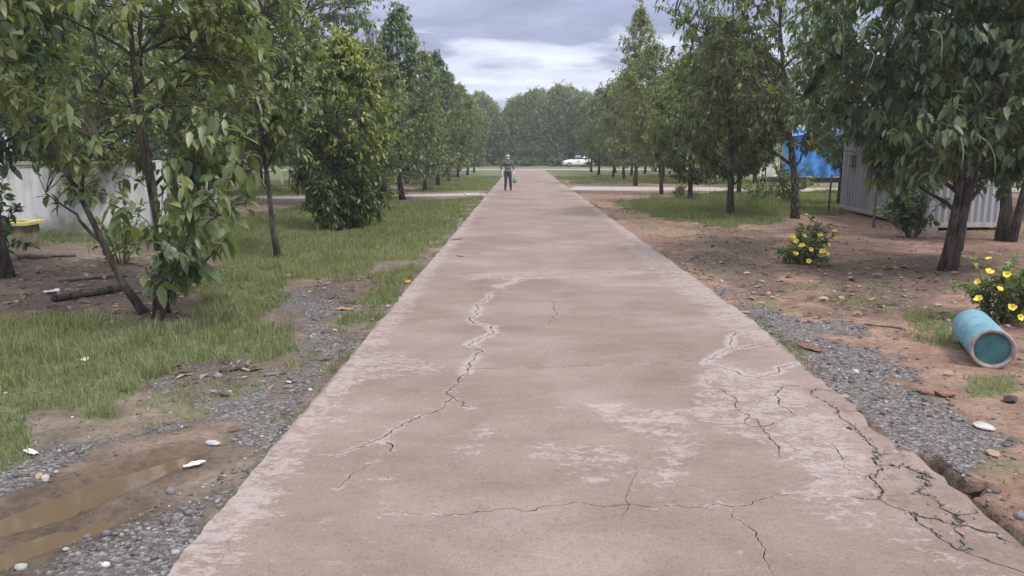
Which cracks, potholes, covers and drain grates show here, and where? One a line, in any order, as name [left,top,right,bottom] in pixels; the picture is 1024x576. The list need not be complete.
crack [810,389,1024,573]
crack [409,462,800,574]
crack [344,283,799,456]
